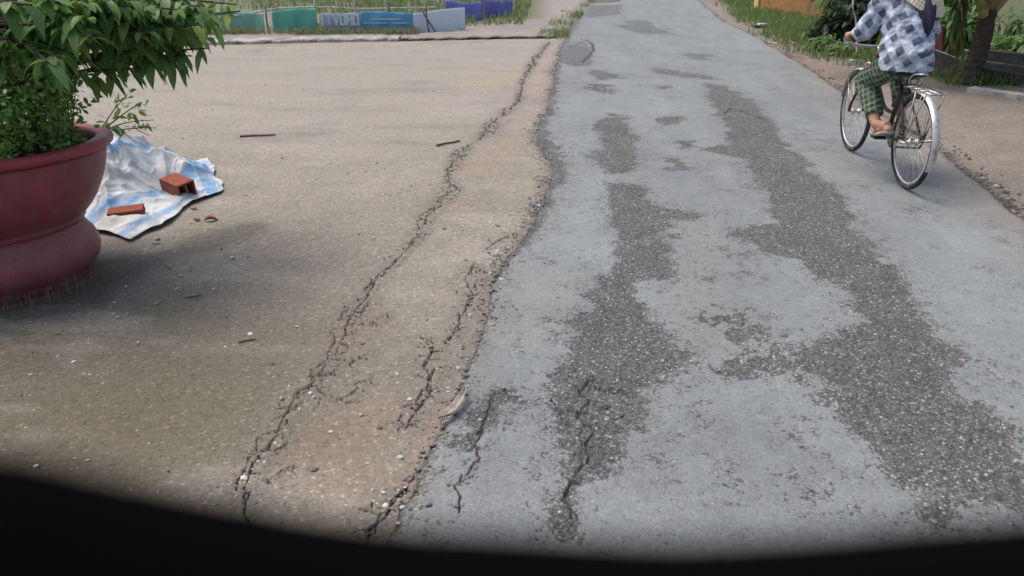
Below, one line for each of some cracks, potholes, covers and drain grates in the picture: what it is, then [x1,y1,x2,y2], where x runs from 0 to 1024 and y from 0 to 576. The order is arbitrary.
crack [580,39,595,63]
crack [550,376,628,520]
crack [362,476,415,524]
crack [235,41,551,501]
